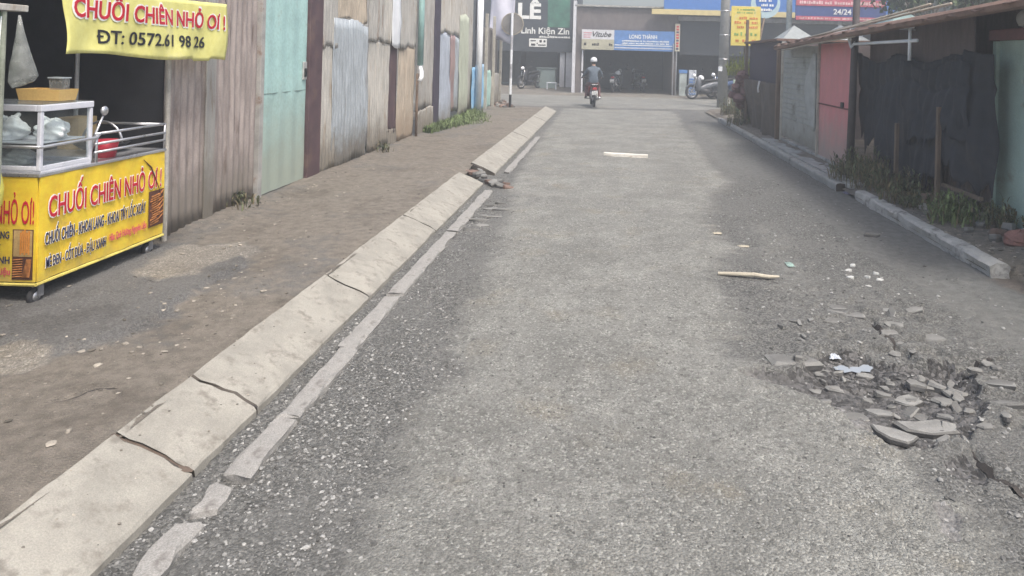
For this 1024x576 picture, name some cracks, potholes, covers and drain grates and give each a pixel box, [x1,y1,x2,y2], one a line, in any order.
pothole [740,348,990,450]
crack [972,451,1024,498]
